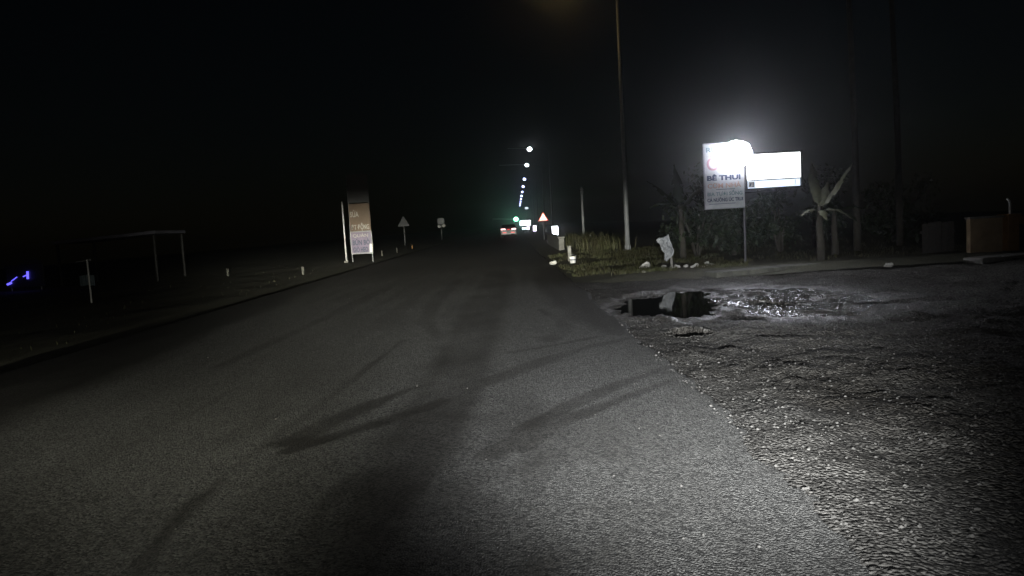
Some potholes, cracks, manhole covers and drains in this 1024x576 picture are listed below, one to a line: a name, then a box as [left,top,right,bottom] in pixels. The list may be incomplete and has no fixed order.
pothole [660,326,718,338]
pothole [607,290,732,322]
pothole [744,298,806,307]
